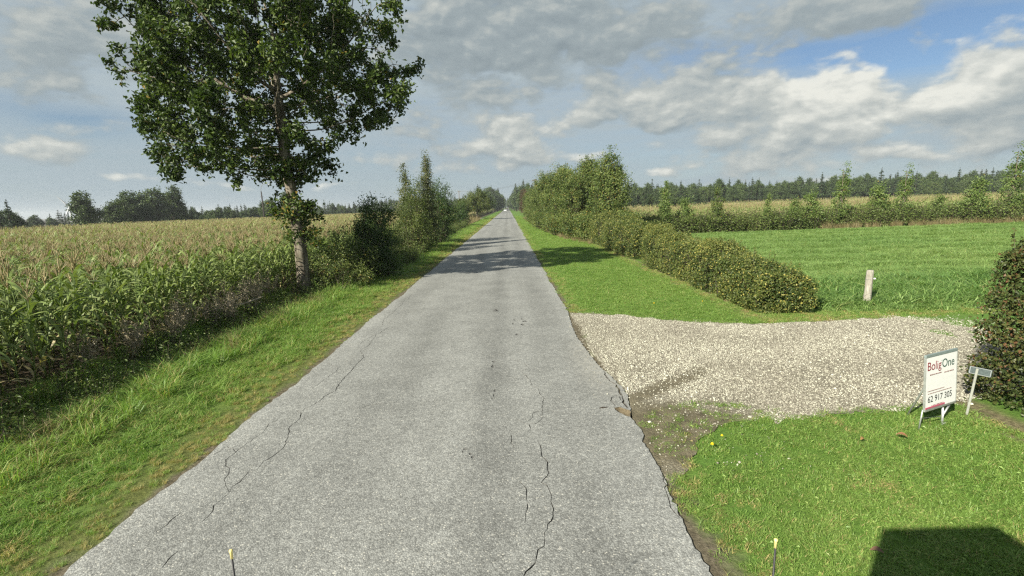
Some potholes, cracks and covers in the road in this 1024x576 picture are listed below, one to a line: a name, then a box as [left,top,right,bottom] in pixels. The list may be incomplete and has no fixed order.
crack [604,371,628,408]
crack [510,359,559,576]
crack [202,356,364,522]
